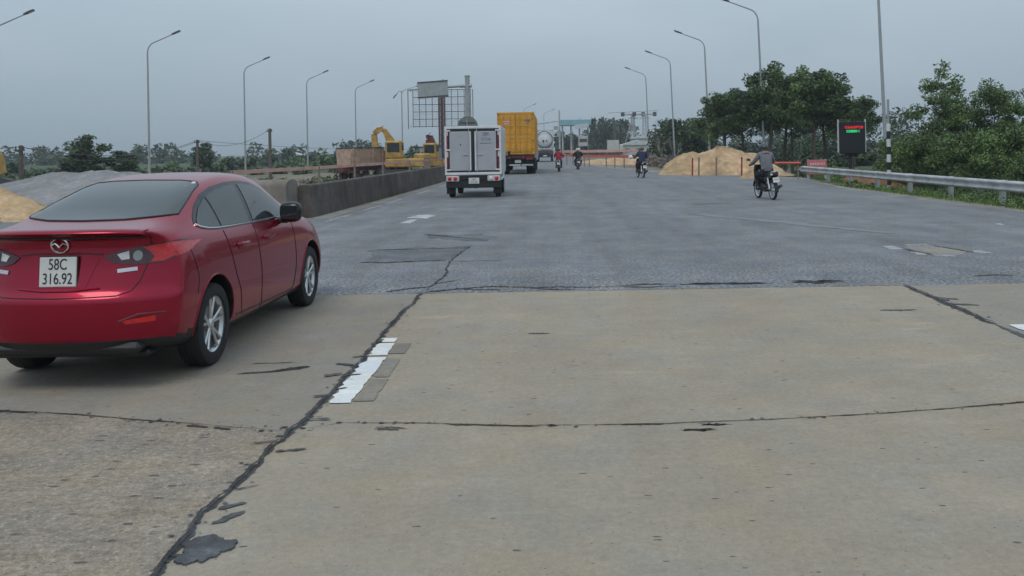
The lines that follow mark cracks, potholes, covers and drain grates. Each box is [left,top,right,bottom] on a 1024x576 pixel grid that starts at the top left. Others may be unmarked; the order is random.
crack [238,362,310,374]
